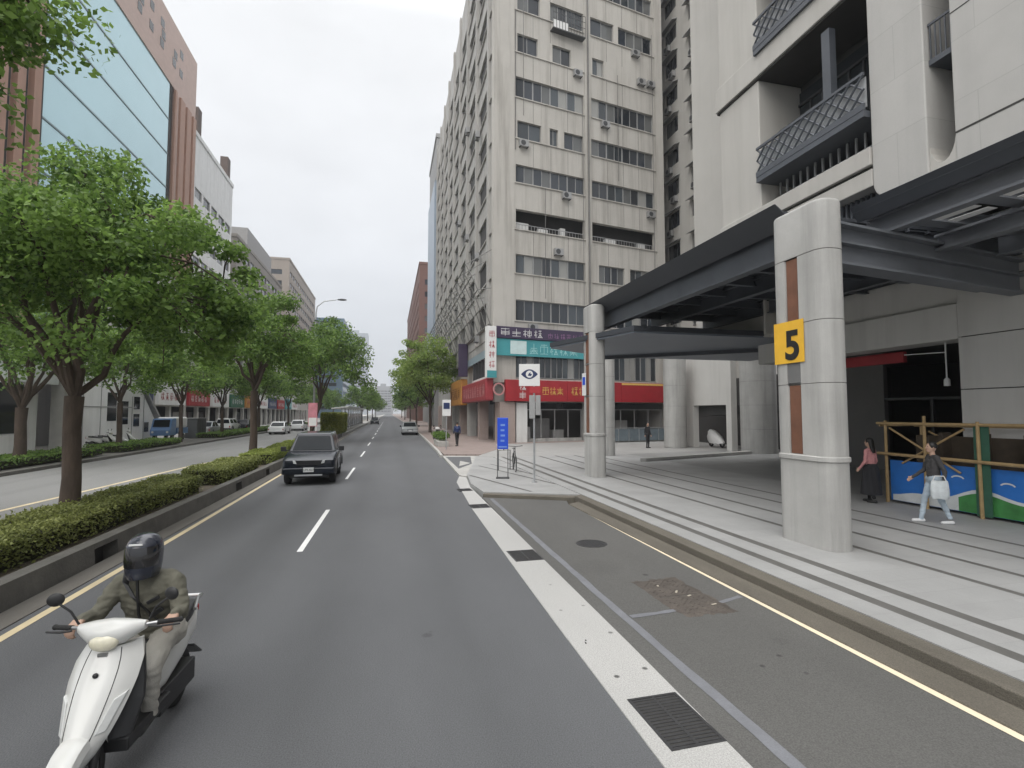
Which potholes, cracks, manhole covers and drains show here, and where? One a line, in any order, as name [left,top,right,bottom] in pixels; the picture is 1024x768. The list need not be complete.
drain grate [506,549,544,562]
drain grate [627,692,727,751]
manhole cover [576,540,607,548]
